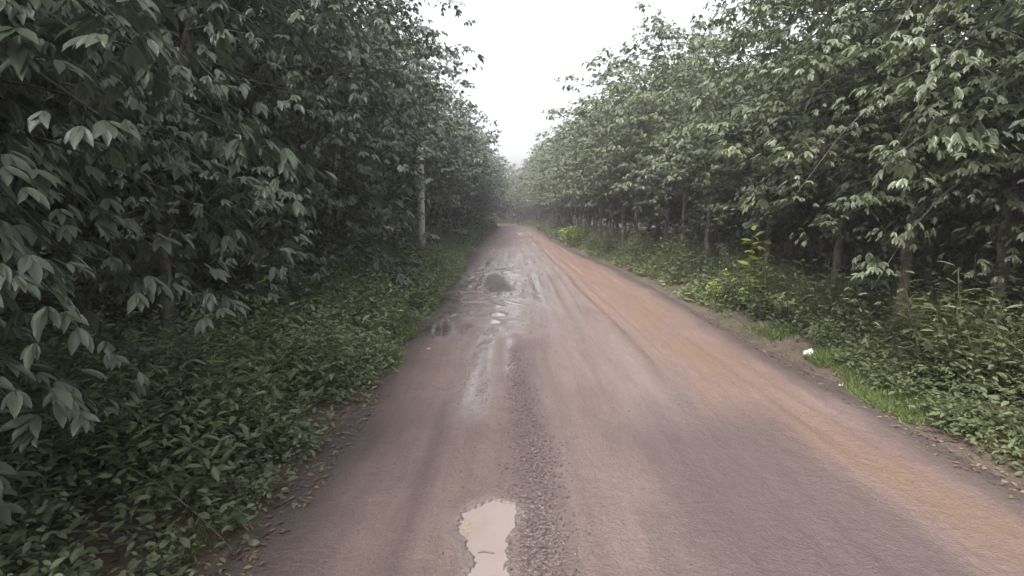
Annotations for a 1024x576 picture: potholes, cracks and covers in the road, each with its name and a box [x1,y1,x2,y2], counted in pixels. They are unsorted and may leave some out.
pothole [448,494,530,576]
pothole [429,319,454,338]
pothole [459,316,509,325]
